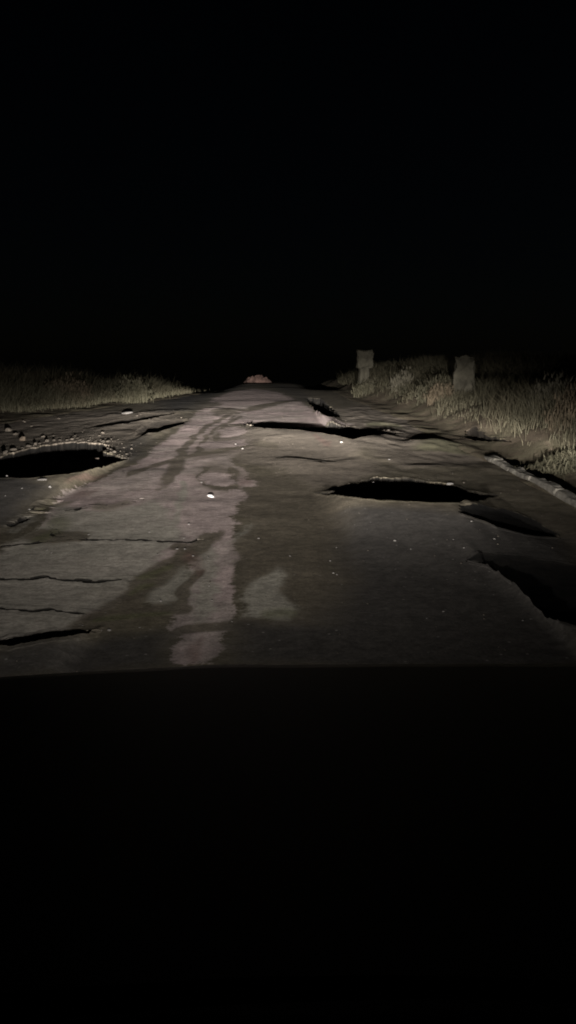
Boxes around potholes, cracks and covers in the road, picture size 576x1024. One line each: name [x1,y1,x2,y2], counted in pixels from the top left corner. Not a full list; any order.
pothole [314,476,499,513]
crack [0,497,216,549]
pothole [228,421,408,440]
pothole [465,550,576,632]
pothole [460,500,559,539]
pothole [0,441,129,479]
crack [0,573,141,619]
crack [255,438,365,466]
pothole [307,397,340,418]
